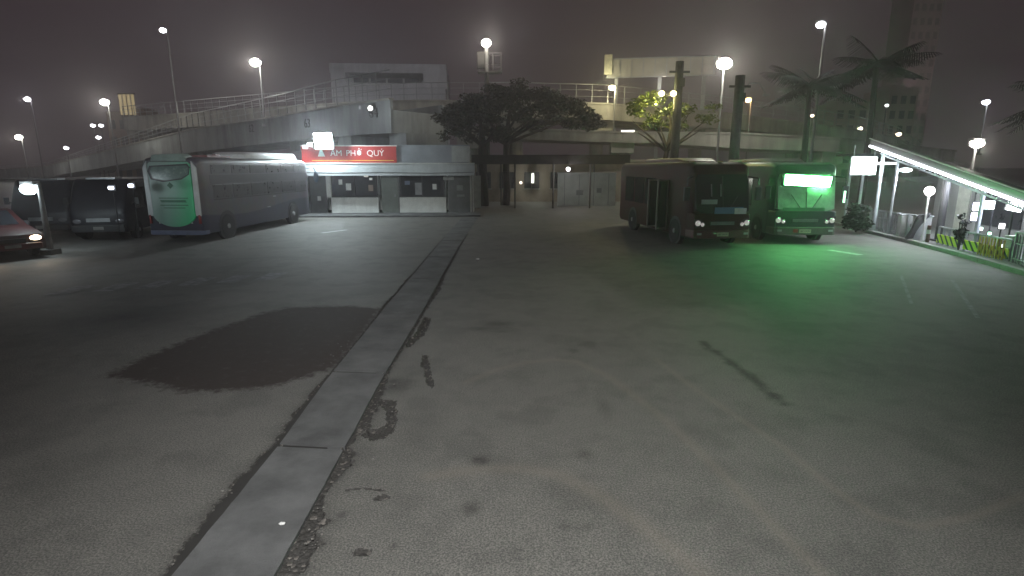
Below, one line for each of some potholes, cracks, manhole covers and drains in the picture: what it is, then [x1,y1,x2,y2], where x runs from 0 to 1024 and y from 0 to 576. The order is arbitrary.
pothole [352,548,373,556]
